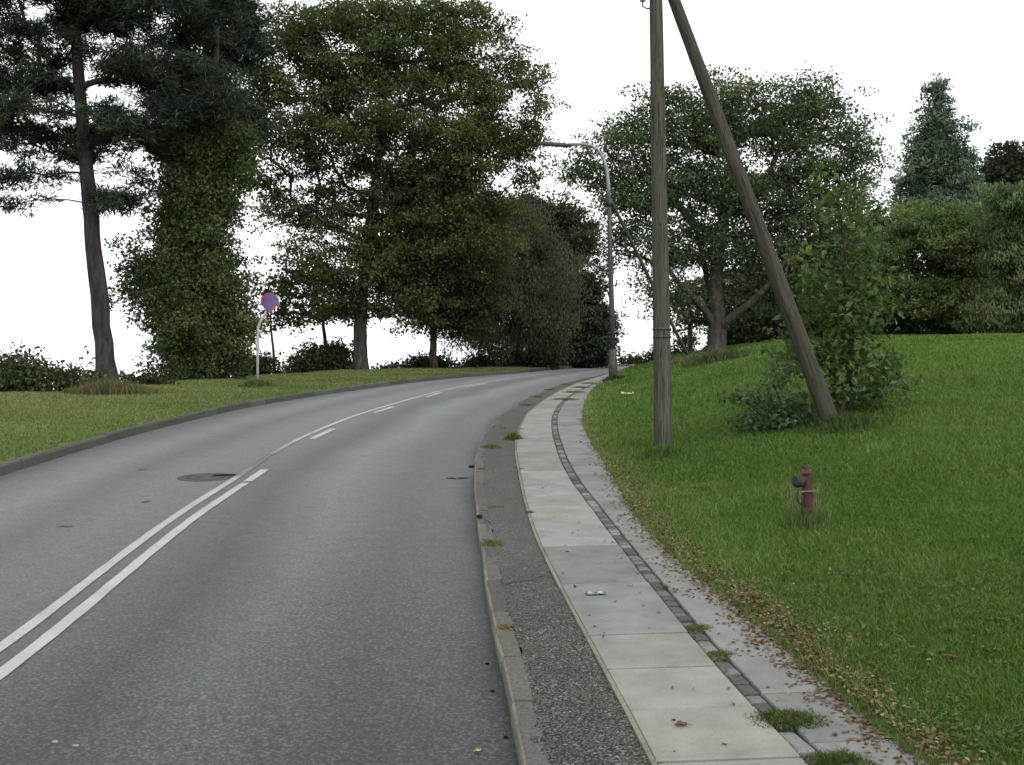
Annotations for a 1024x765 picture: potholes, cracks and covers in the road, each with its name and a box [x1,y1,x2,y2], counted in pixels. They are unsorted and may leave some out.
manhole cover [177,473,234,482]
